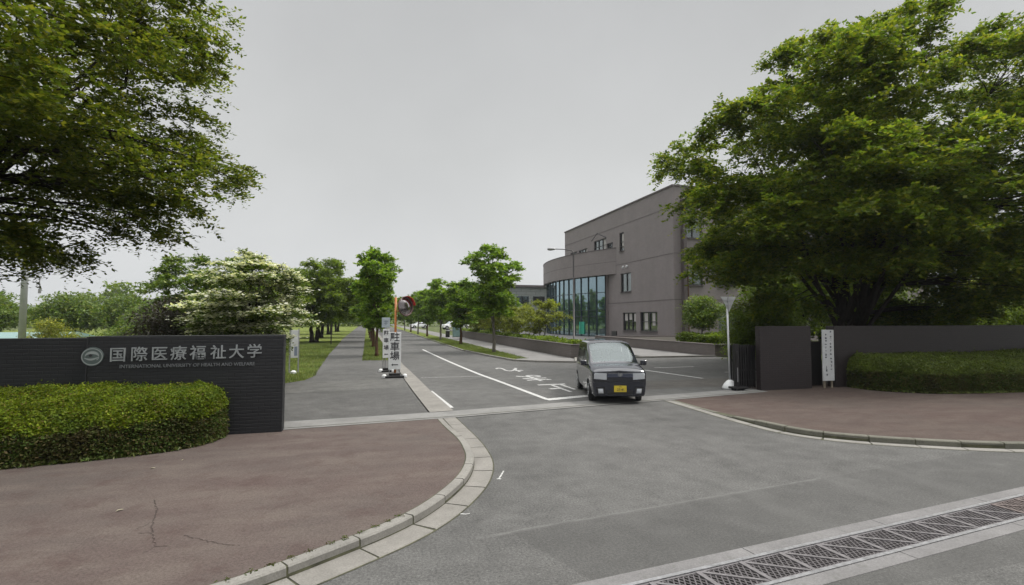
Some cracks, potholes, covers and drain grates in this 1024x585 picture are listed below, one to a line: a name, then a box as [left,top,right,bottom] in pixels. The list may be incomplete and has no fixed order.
drain grate [778,545,850,570]
drain grate [849,529,917,551]
drain grate [648,572,713,585]
drain grate [881,522,948,543]
crack [137,500,239,553]
drain grate [965,504,1024,521]
drain grate [815,537,886,561]
drain grate [991,499,1024,514]
drain grate [911,516,976,535]
drain grate [939,510,1003,528]
drain grate [738,553,812,581]
drain grate [695,562,770,585]
